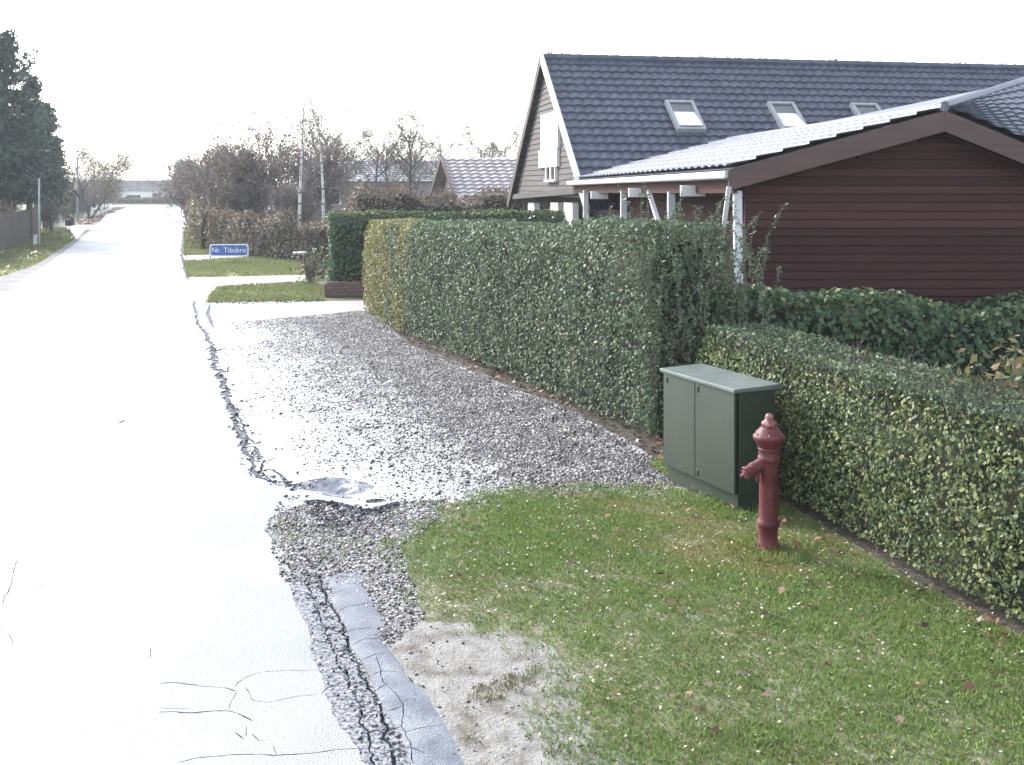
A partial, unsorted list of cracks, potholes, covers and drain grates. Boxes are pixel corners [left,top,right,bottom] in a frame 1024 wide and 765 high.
crack [192,301,287,486]
pothole [275,477,374,499]
crack [162,543,433,765]
